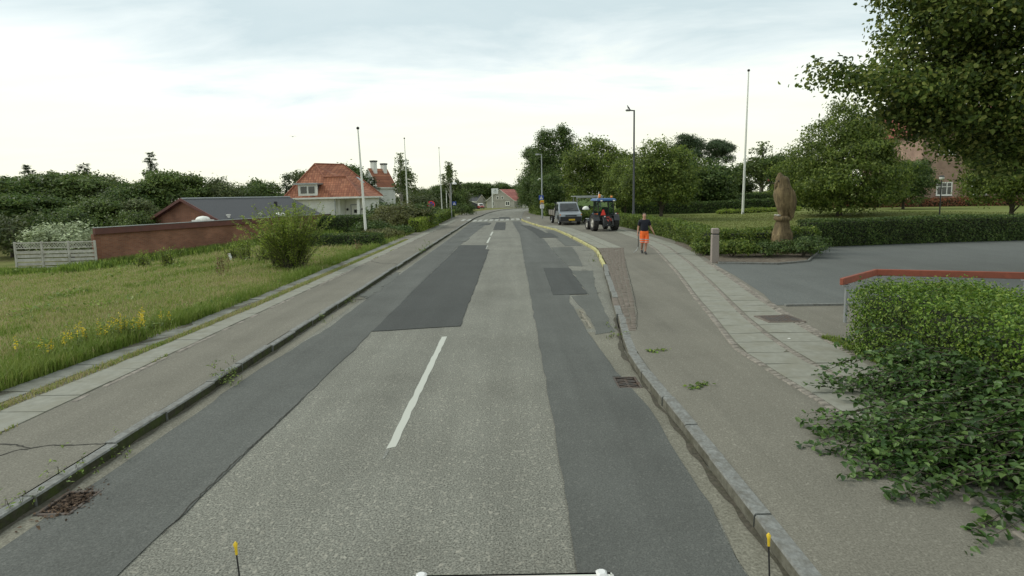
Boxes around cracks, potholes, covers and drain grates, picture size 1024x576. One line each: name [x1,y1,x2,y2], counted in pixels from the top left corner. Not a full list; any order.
manhole cover [754,315,806,323]
drain grate [15,479,110,533]
drain grate [613,376,643,388]
crack [0,443,105,456]
